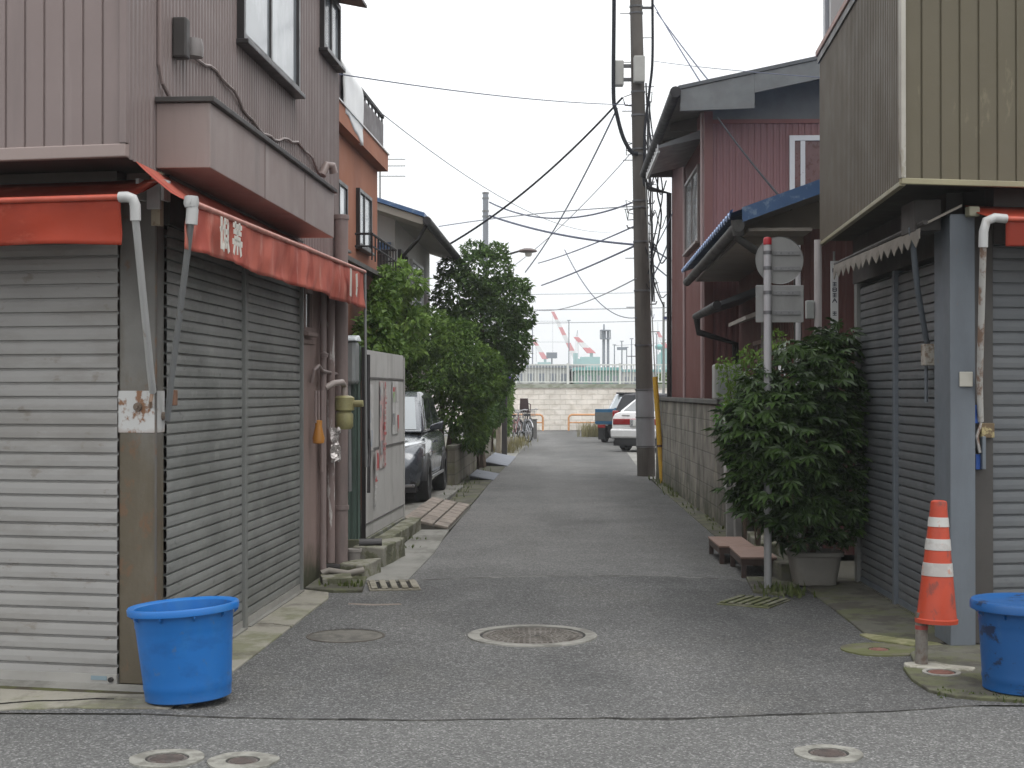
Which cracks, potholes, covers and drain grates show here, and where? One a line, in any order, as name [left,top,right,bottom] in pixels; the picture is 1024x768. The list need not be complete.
manhole cover [922,668,961,677]
manhole cover [129,749,205,768]
manhole cover [306,628,385,643]
drain grate [367,579,421,591]
manhole cover [207,751,280,768]
manhole cover [467,624,597,647]
manhole cover [840,643,915,657]
manhole cover [794,744,864,763]
drain grate [717,595,791,609]
